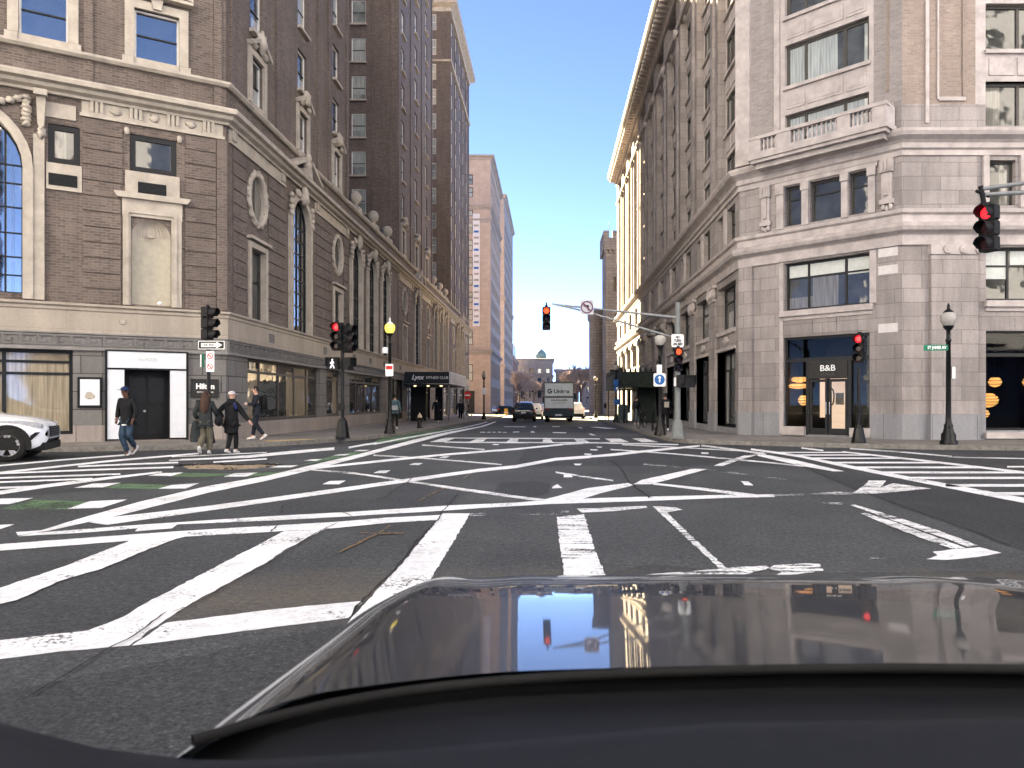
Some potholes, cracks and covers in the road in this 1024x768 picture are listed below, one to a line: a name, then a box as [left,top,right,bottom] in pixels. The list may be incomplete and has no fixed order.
crack [606,459,650,498]
